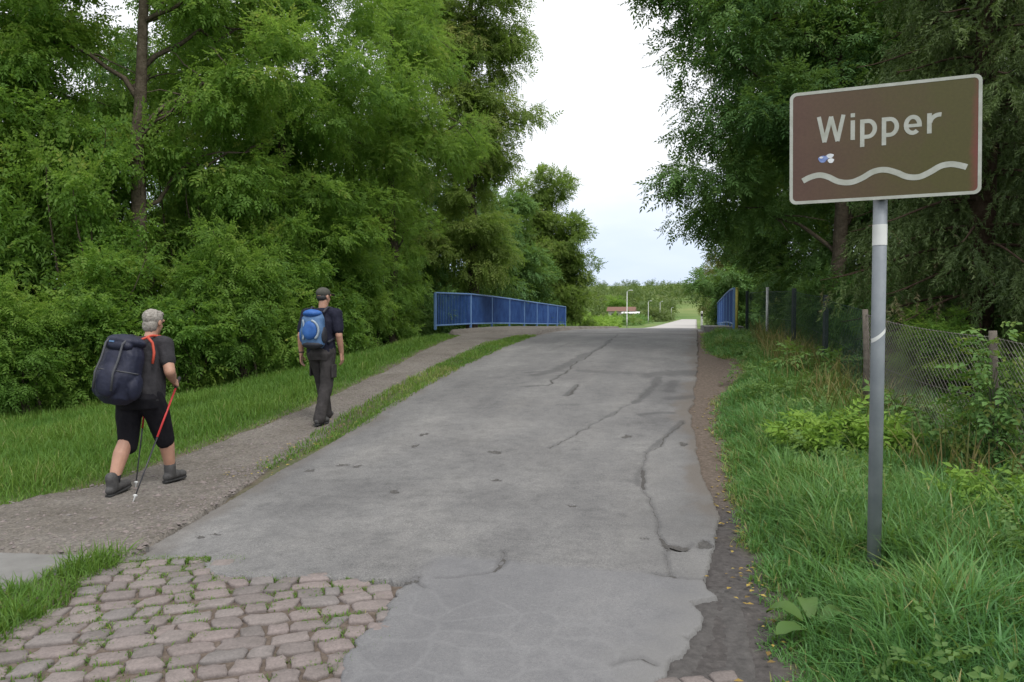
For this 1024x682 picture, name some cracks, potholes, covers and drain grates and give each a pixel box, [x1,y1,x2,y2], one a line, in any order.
crack [641,422,689,578]
crack [545,335,618,396]
